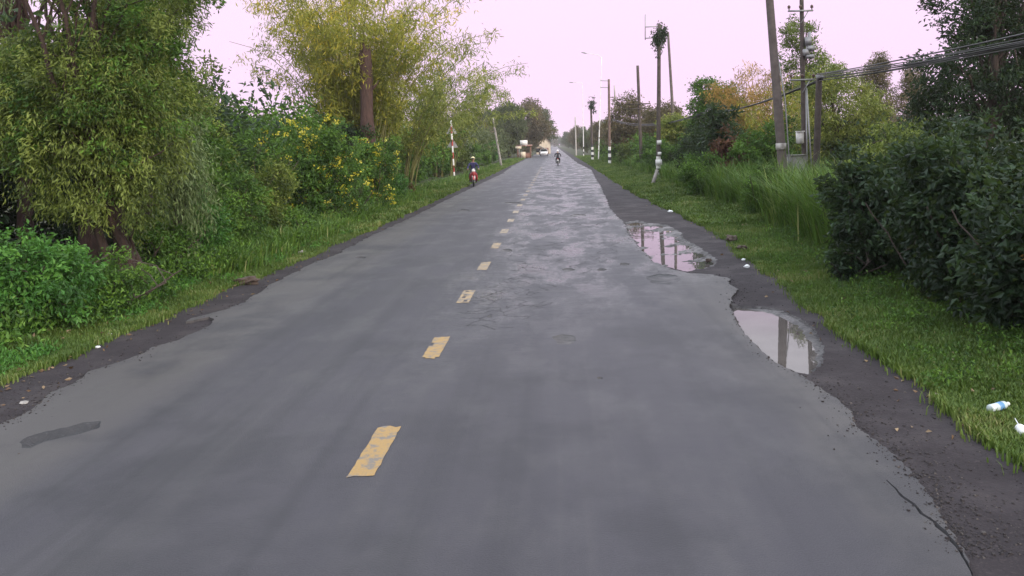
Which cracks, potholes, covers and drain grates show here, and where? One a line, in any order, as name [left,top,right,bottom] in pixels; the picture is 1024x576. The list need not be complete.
pothole [625,220,718,272]
pothole [731,302,825,375]
pothole [646,274,680,285]
crack [465,181,617,330]
pothole [552,334,576,345]
crack [887,480,973,576]
